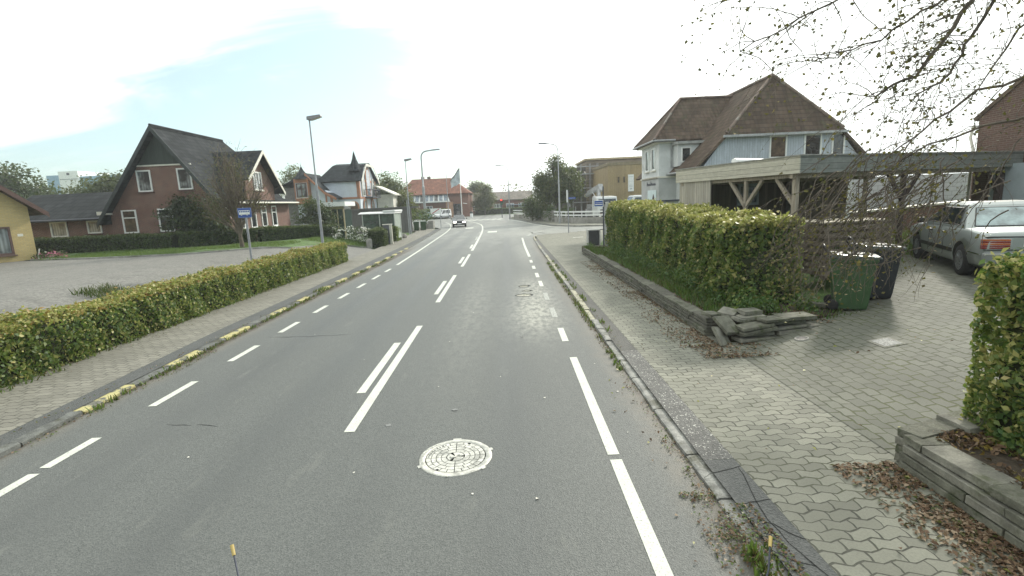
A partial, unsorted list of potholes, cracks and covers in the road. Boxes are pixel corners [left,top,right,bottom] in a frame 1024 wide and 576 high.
manhole cover [417,438,493,477]
